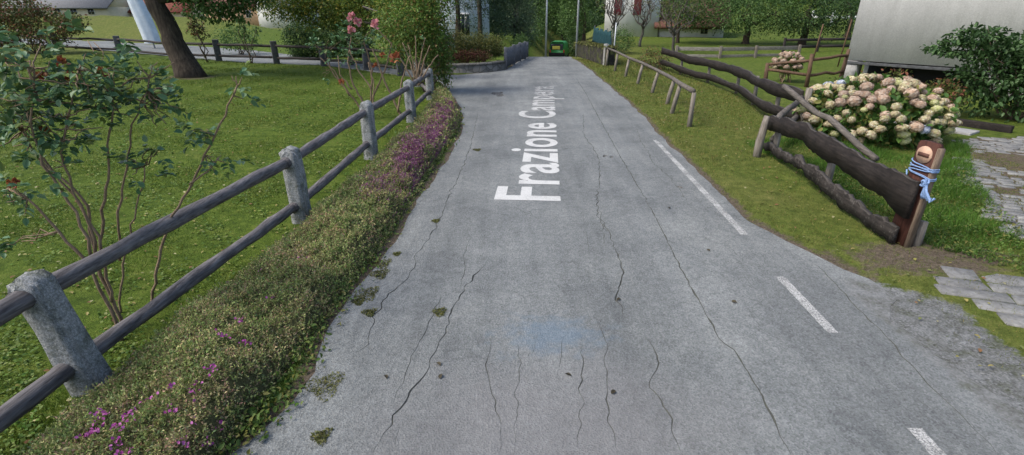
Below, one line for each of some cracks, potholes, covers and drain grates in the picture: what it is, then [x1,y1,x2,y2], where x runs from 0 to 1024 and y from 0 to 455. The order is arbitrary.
crack [353,114,478,356]
crack [578,82,791,455]
crack [485,333,538,455]
crack [559,333,585,455]
crack [373,241,481,455]
